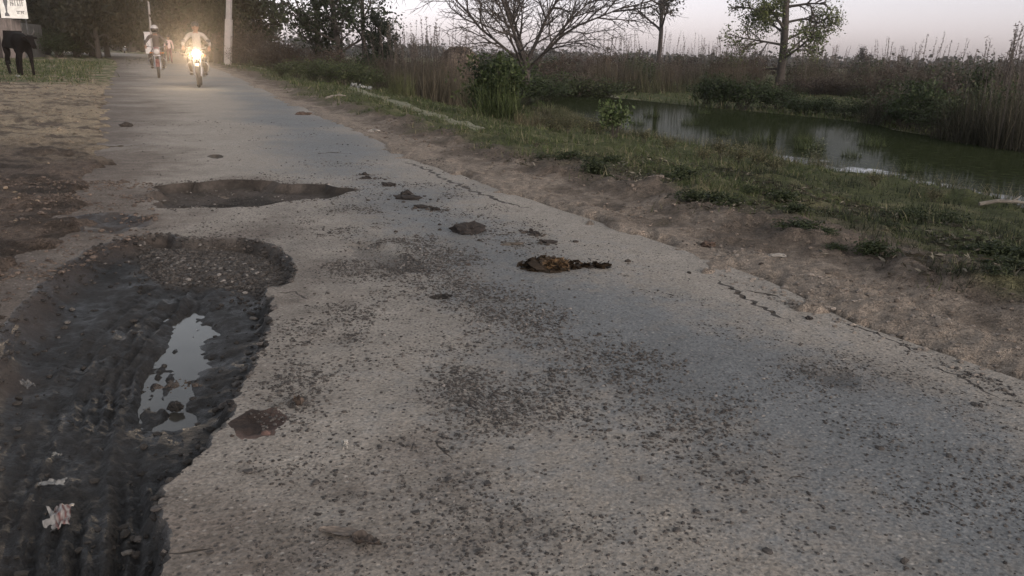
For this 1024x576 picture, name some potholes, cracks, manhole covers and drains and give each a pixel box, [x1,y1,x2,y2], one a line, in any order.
crack [845,323,1000,399]
crack [717,280,793,323]
pothole [0,233,296,576]
pothole [142,179,360,208]
crack [406,162,529,208]
